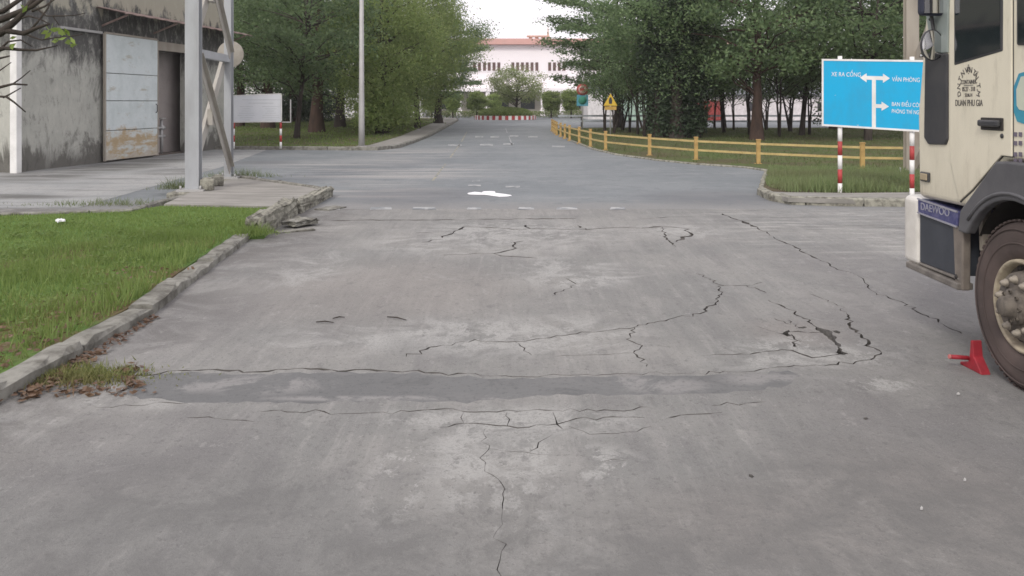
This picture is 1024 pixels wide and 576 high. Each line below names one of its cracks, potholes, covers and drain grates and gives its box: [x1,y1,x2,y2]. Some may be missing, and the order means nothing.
pothole [815,327,841,347]
crack [123,274,882,378]
crack [423,225,693,258]
crack [100,402,758,576]
crack [721,214,962,334]
